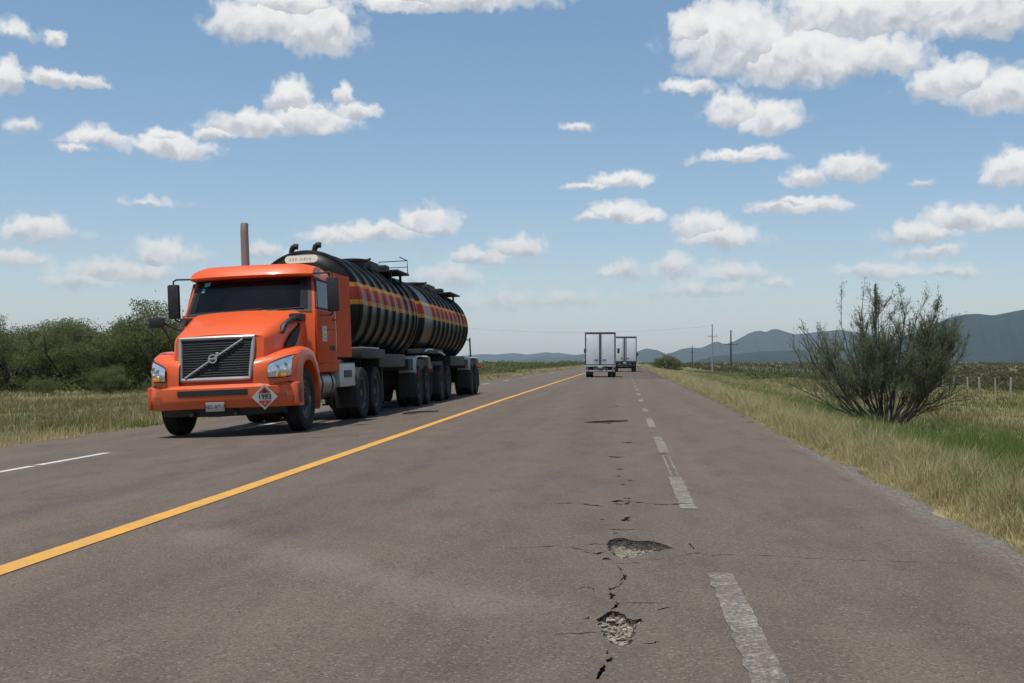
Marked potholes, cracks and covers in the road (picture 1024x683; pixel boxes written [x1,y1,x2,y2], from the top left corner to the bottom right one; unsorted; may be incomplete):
pothole [606,538,674,558]
crack [497,440,679,610]
crack [595,650,613,680]
crack [659,543,985,565]
pothole [596,611,643,646]
